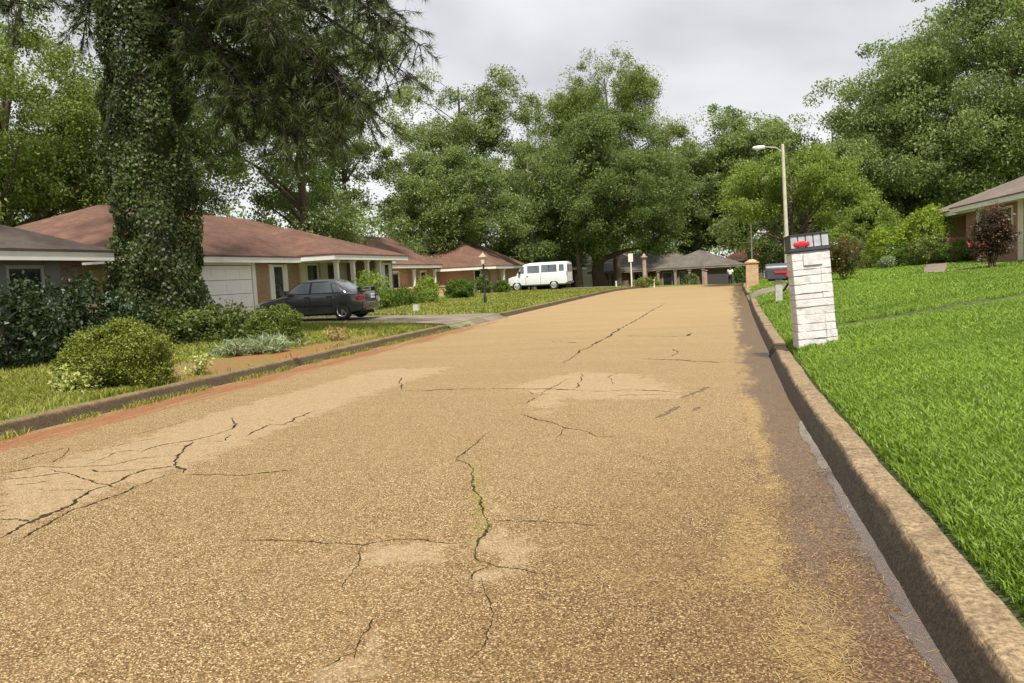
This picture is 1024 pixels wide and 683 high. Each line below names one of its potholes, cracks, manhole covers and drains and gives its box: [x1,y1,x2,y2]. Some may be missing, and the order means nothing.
crack [427,304,677,438]
crack [327,619,373,666]
crack [247,539,455,589]
crack [1,411,314,539]
crack [456,430,540,657]
